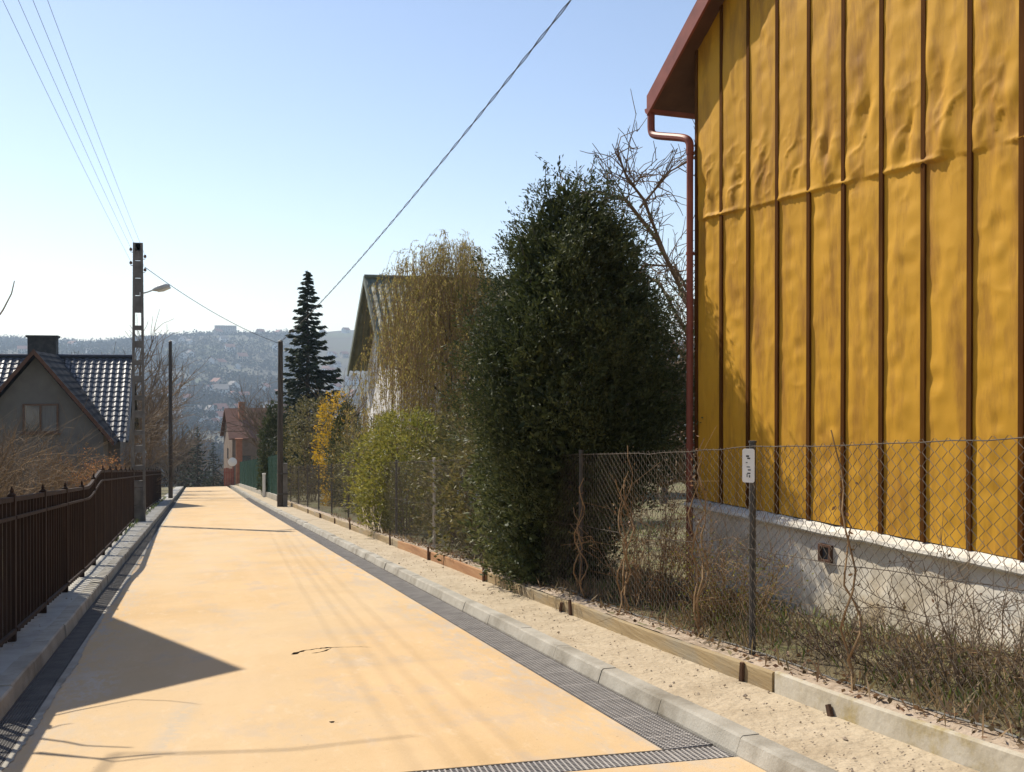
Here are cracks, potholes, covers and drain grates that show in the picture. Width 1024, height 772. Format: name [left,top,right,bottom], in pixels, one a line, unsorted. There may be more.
crack [292,647,337,655]
